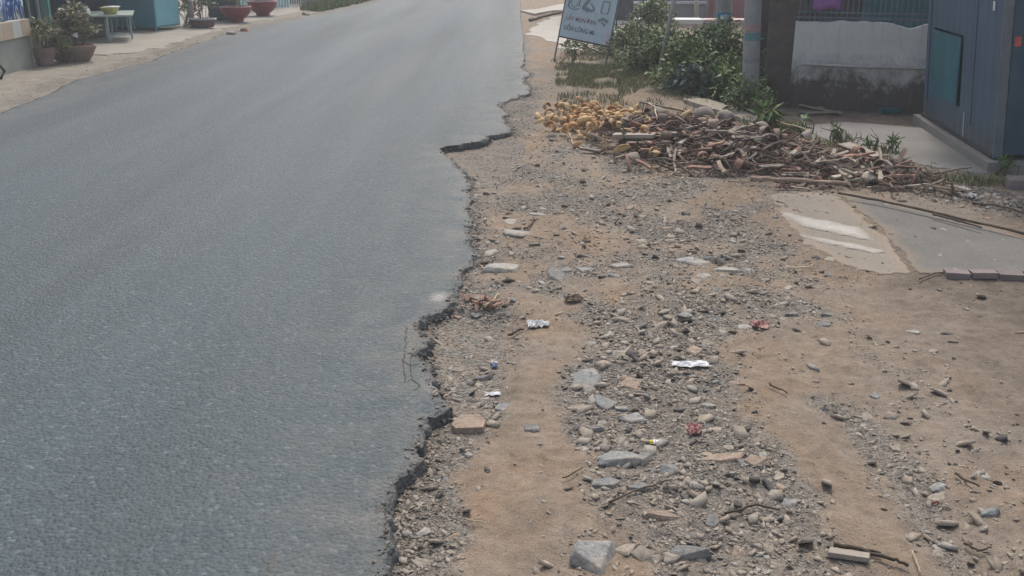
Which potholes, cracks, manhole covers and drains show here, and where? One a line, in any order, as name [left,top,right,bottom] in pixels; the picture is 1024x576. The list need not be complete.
crack [402,328,420,390]
